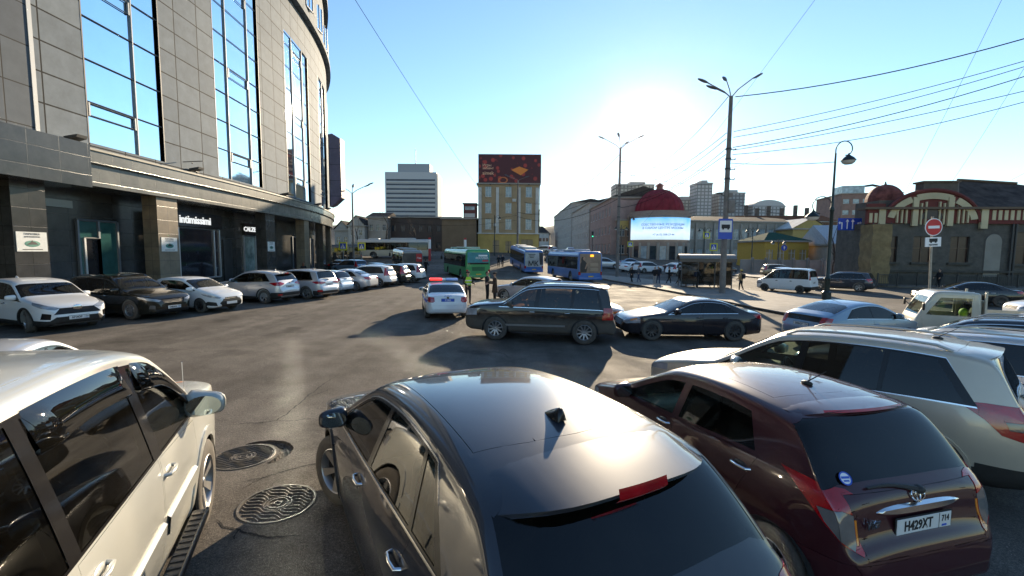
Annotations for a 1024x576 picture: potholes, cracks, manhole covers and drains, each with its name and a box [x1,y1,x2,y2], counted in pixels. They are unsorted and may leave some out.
manhole cover [235,484,317,524]
manhole cover [215,444,276,470]
crack [233,374,339,425]
crack [216,519,300,539]
